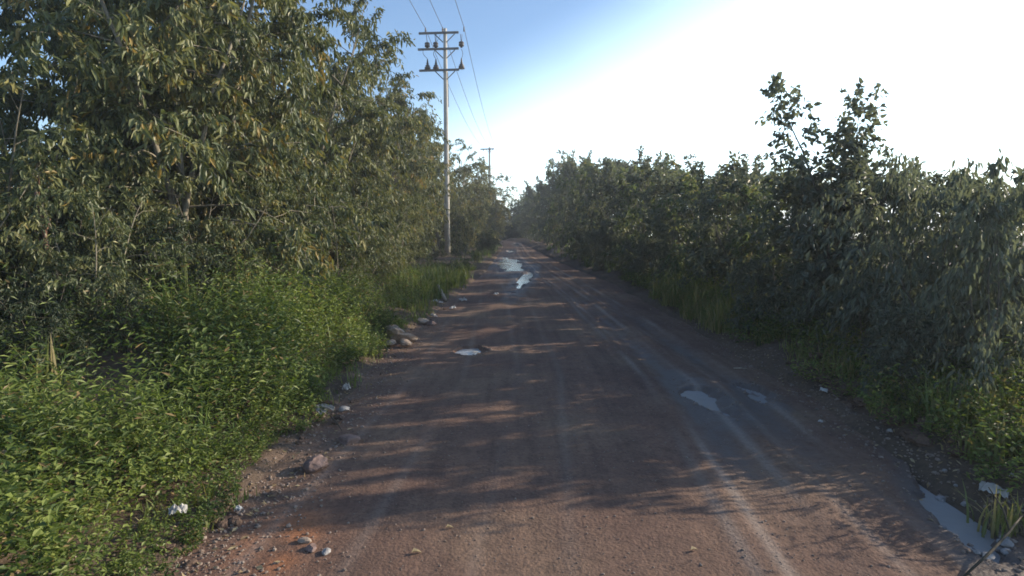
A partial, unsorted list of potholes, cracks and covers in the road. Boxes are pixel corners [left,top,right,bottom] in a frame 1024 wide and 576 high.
pothole [732,382,787,409]
pothole [492,255,528,278]
pothole [673,378,756,422]
pothole [508,267,536,296]
pothole [451,345,493,356]
